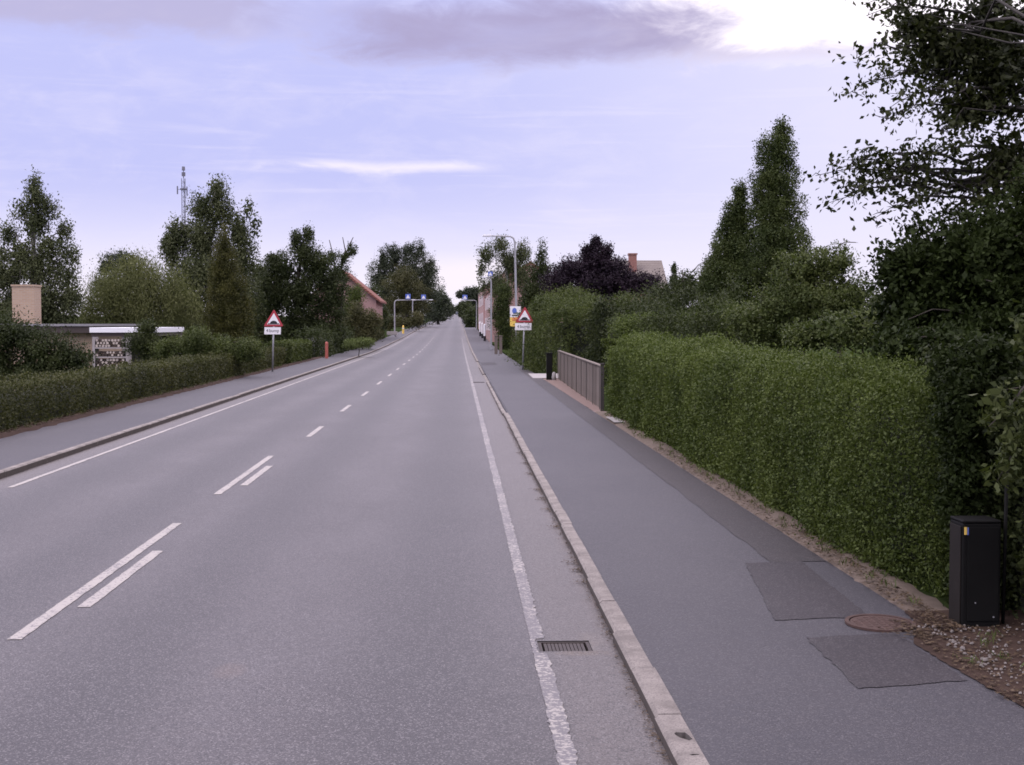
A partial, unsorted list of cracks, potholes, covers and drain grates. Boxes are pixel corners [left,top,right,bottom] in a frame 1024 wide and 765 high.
manhole cover [845,614,916,632]
drain grate [537,641,593,651]
